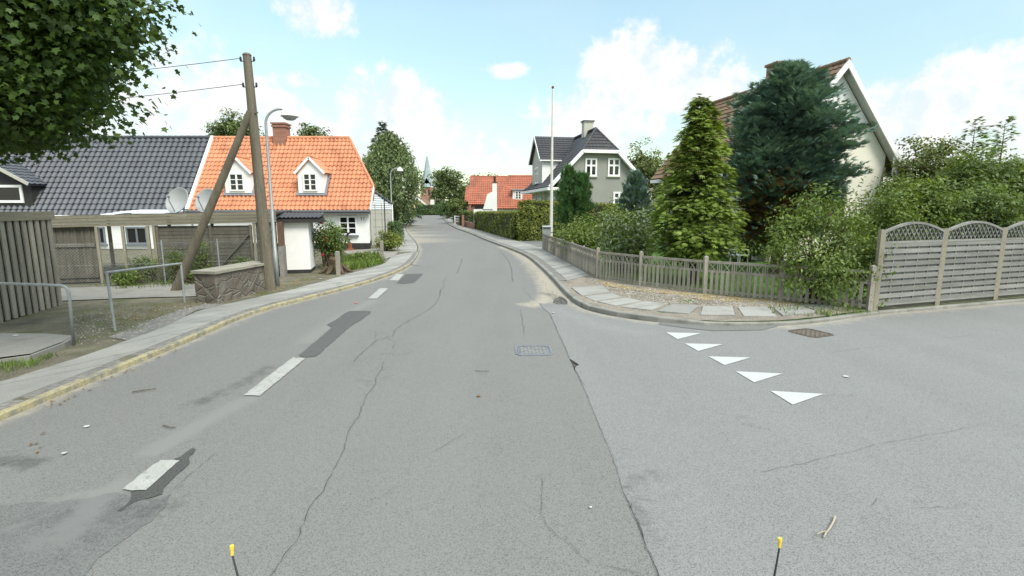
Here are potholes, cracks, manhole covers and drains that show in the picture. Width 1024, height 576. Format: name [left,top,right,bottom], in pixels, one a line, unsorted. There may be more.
crack [762,423,983,472]
crack [272,266,460,573]
manhole cover [515,345,553,356]
